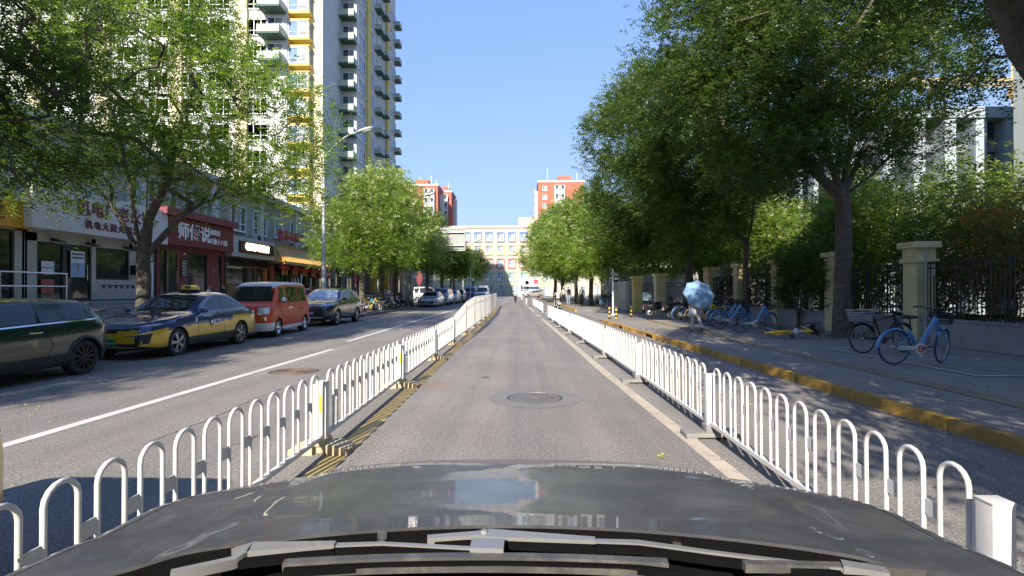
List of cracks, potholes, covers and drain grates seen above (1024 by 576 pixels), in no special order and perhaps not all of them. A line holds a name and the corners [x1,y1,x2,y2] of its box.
manhole cover [489,389,584,408]
